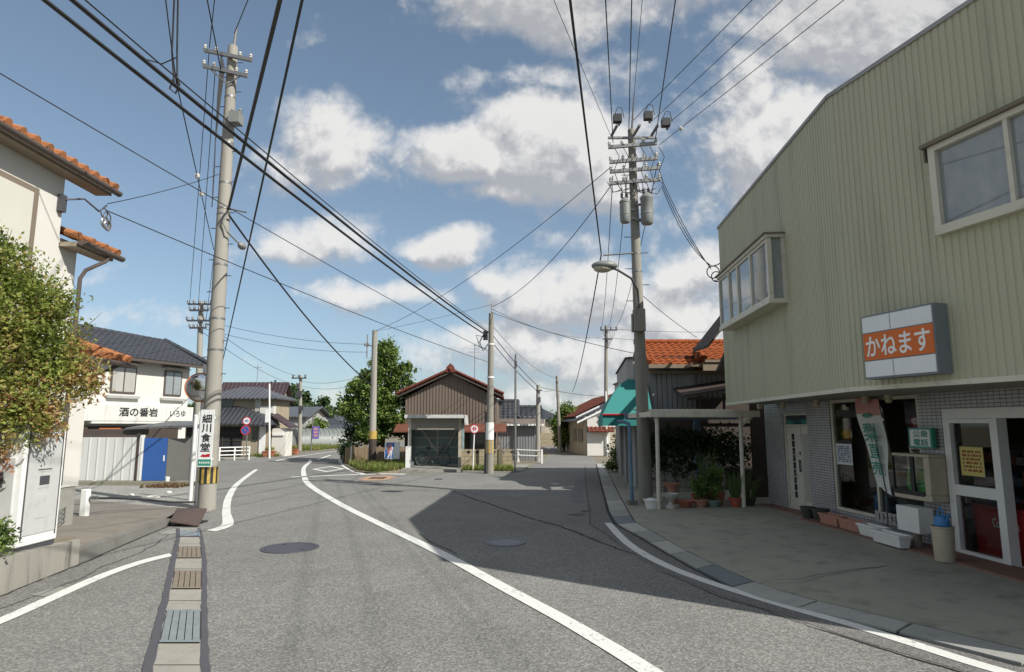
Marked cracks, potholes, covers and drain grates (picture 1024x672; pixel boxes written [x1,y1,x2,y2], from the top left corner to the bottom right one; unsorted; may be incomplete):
crack [774,566,884,580]
manhole cover [486,539,525,547]
drain grate [159,609,202,642]
drain grate [171,570,202,589]
manhole cover [260,542,319,554]
drain grate [177,546,202,558]
